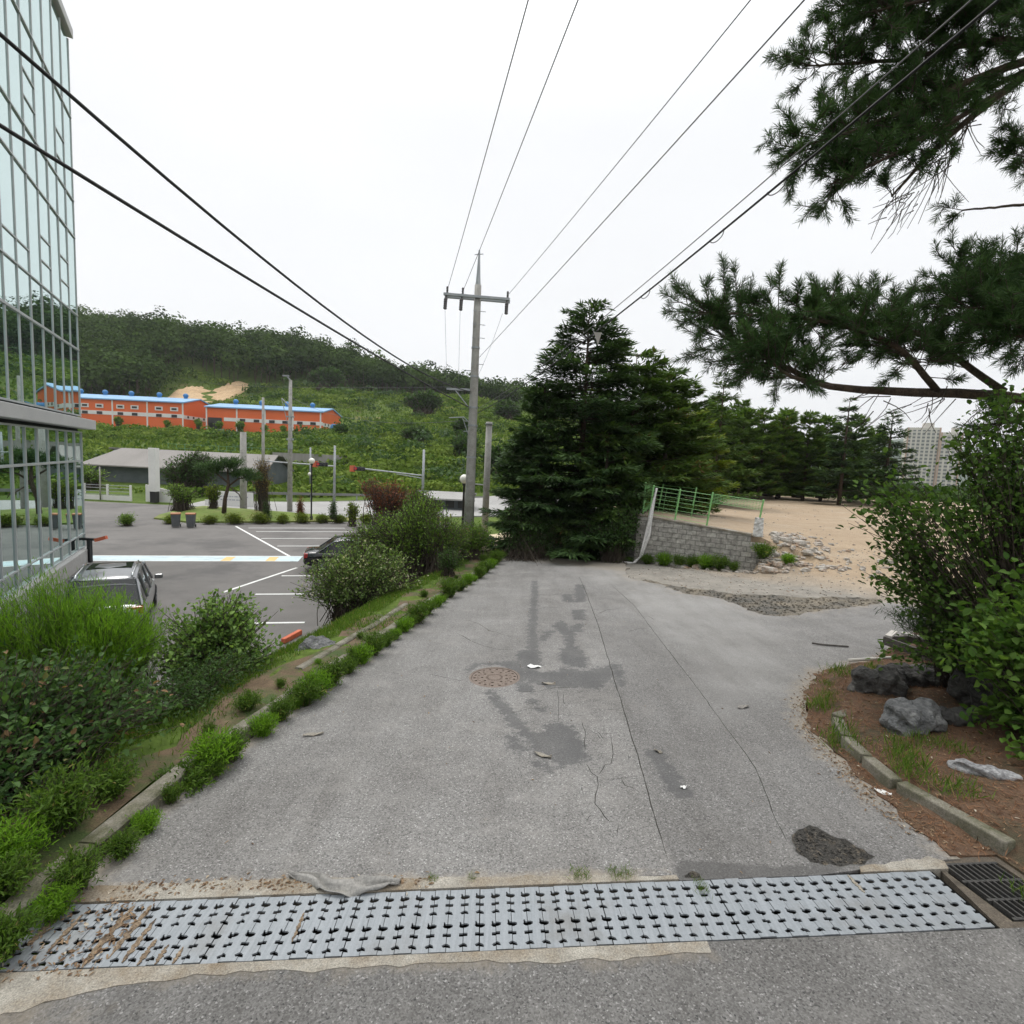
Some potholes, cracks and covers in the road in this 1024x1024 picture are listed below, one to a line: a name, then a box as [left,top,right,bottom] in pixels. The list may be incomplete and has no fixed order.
drain grate [342,889,479,957]
drain grate [200,894,360,964]
drain grate [54,898,238,970]
drain grate [480,884,613,951]
crack [513,687,644,836]
manhole cover [469,667,520,688]
drain grate [0,903,113,973]
drain grate [597,880,744,945]
drain grate [711,875,871,940]
drain grate [822,871,995,934]
